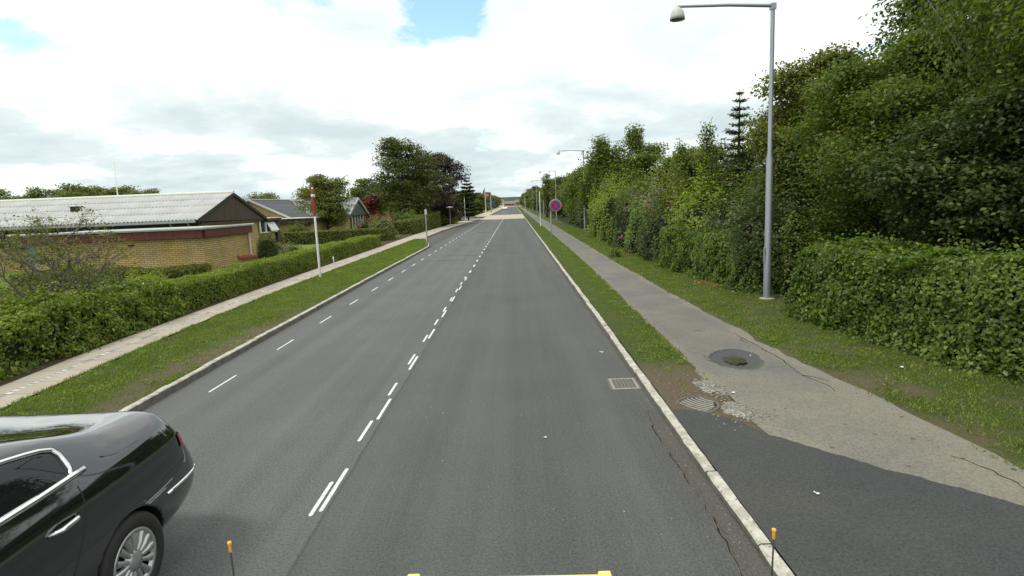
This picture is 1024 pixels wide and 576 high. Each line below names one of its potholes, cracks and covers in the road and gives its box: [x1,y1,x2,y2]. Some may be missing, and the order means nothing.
crack [953,456,1024,488]
crack [647,409,766,576]
drain grate [606,378,643,391]
crack [735,333,835,391]
